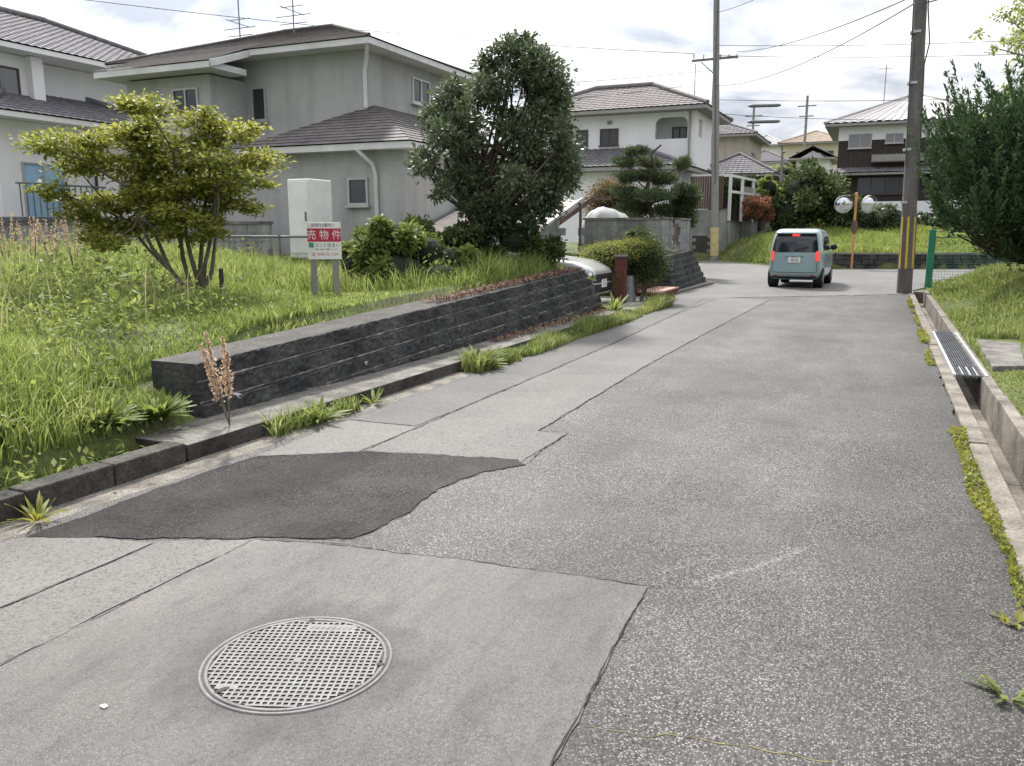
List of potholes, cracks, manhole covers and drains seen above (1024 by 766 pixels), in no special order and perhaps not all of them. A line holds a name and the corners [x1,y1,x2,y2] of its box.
drain grate [941,349,978,364]
manhole cover [197,616,393,715]
crack [166,465,849,766]
drain grate [936,339,969,351]
drain grate [932,331,962,340]
